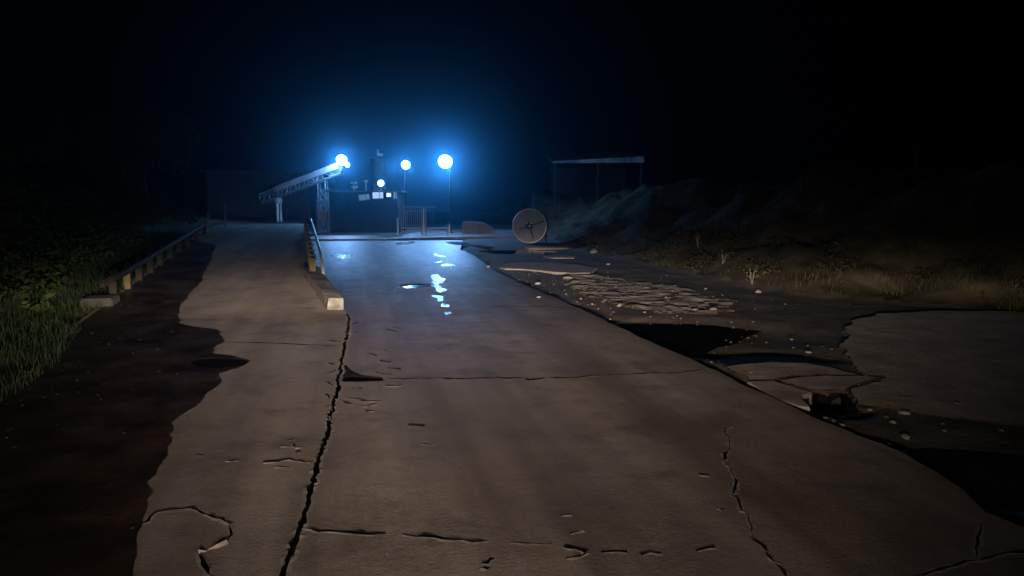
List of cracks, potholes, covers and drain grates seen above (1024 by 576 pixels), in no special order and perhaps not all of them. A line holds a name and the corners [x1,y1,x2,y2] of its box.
crack [193,313,791,576]
pothole [188,357,250,369]
pothole [803,392,864,420]
crack [130,506,235,576]
crack [909,523,1024,576]
